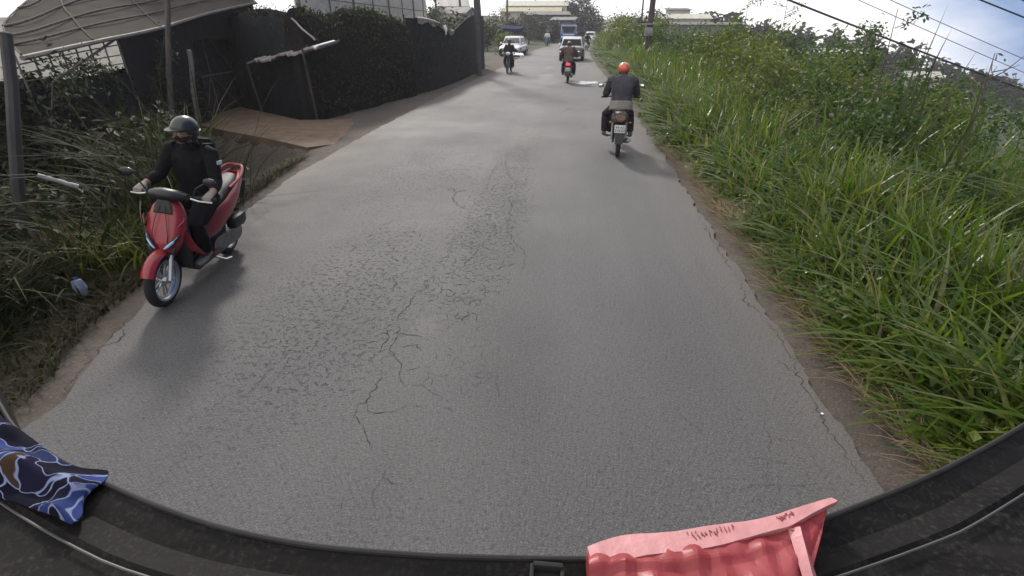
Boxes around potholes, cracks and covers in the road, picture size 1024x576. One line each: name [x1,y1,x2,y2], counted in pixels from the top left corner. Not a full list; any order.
crack [246,114,543,445]
crack [53,310,139,408]
crack [699,220,868,484]
